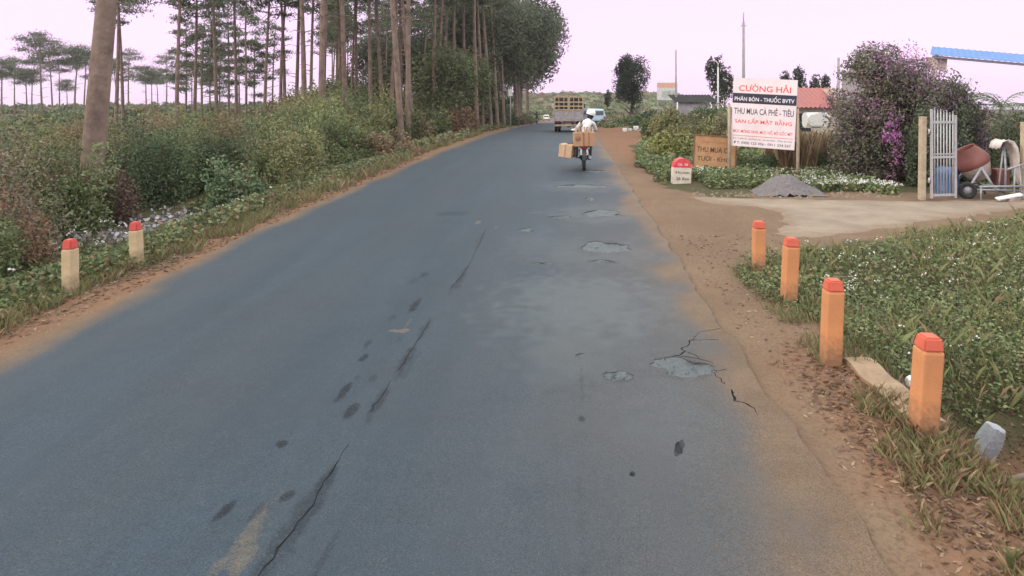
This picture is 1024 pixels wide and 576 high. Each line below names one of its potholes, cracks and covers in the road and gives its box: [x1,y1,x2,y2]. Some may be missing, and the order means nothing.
pothole [602,371,634,382]
pothole [579,241,632,254]
pothole [649,356,717,379]
crack [672,328,757,413]
pothole [674,440,685,457]
crack [258,231,485,576]
